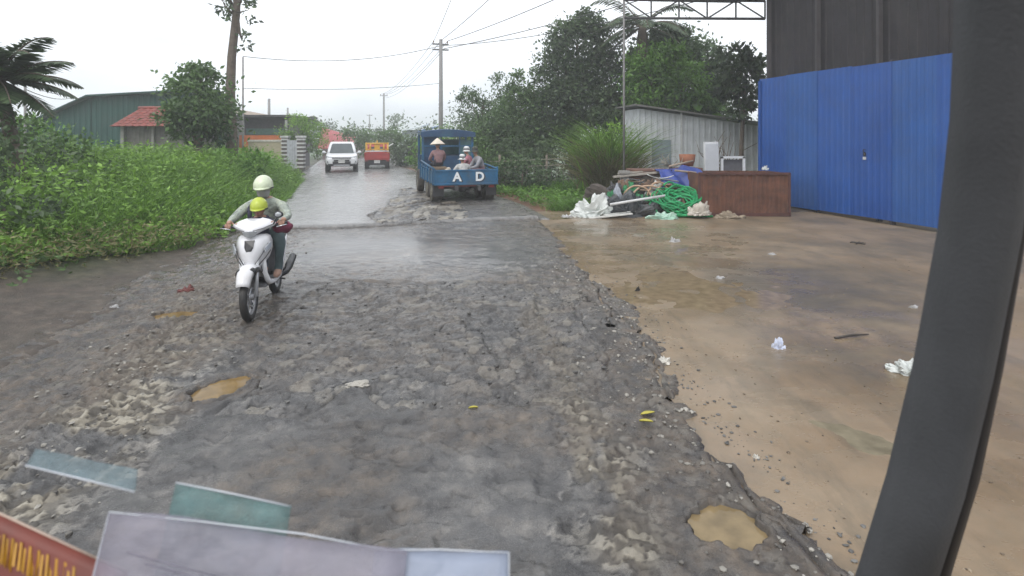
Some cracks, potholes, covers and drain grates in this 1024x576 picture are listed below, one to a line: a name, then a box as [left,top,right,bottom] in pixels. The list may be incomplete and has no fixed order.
pothole [678,494,779,560]
pothole [146,306,206,321]
pothole [178,371,261,412]
